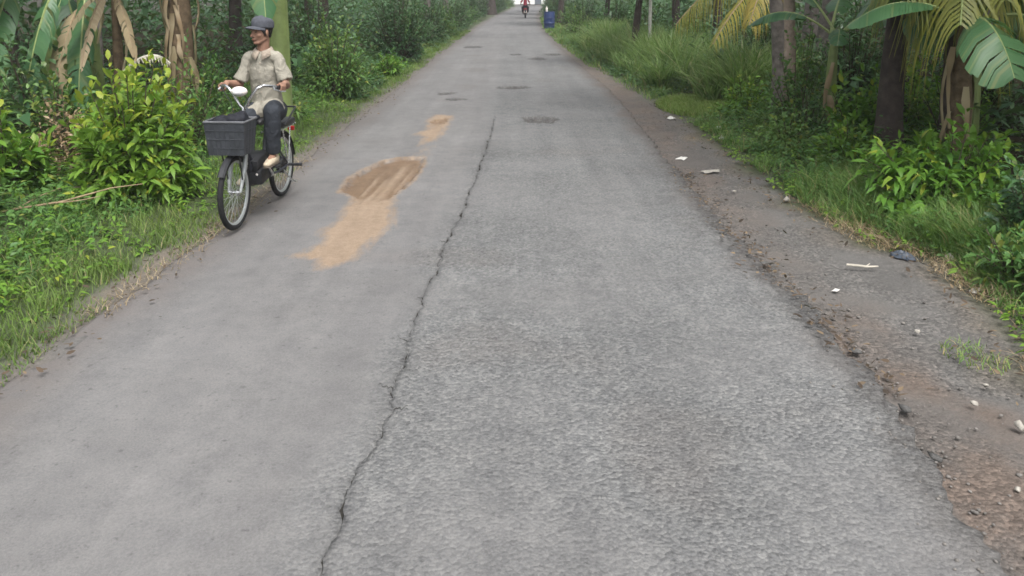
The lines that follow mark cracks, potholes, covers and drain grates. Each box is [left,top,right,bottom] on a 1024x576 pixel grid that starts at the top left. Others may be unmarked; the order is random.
crack [321,129,492,575]
pothole [514,114,572,125]
